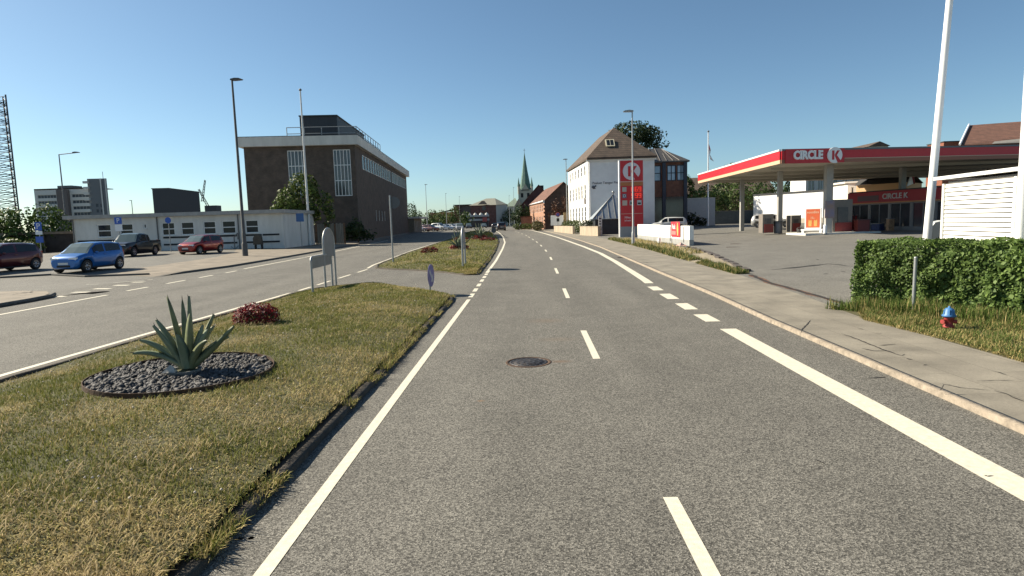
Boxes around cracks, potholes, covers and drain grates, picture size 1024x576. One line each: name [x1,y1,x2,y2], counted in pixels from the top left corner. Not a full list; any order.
manhole cover [506,357,551,368]
